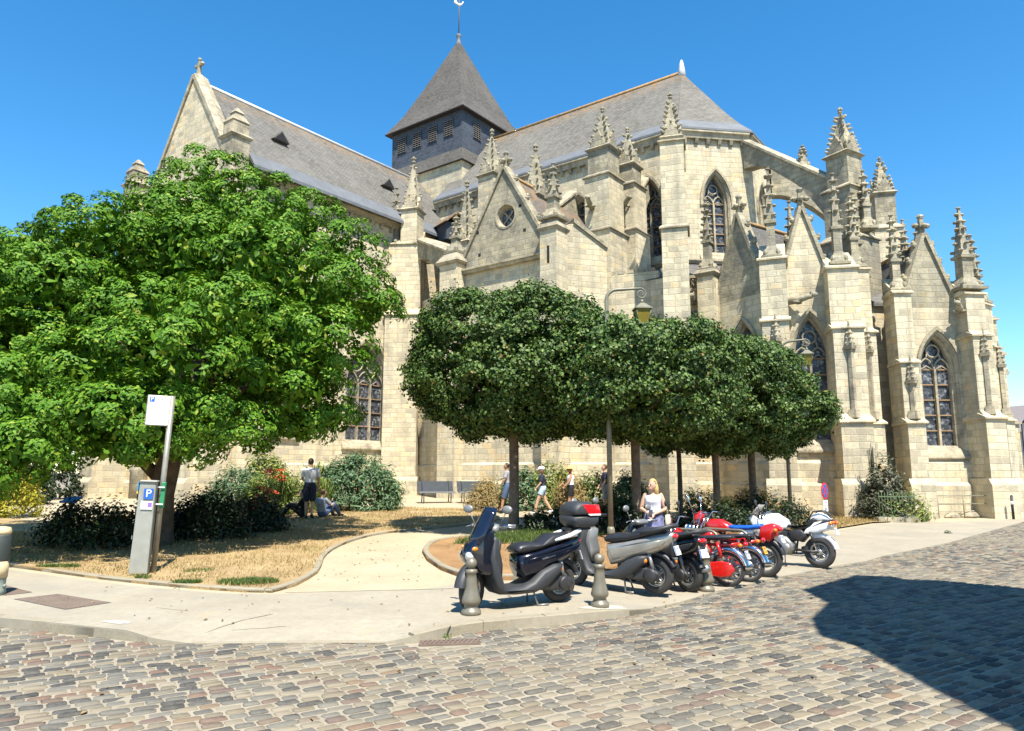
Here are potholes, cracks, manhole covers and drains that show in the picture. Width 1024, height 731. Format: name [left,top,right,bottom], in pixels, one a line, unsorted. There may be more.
crack [206,614,286,633]
manhole cover [16,594,111,609]
drain grate [418,638,481,646]
